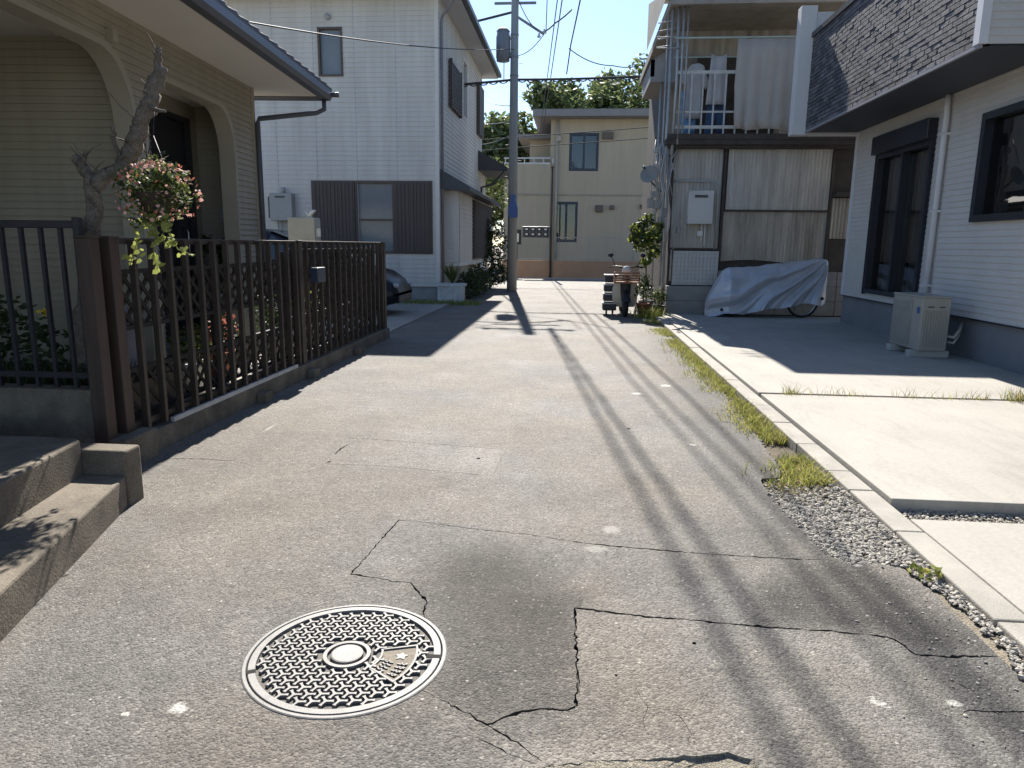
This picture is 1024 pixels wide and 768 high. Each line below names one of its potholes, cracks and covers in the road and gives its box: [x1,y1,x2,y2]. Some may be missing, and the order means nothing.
manhole cover [241,605,447,720]
crack [422,608,997,766]
crack [955,682,1024,715]
